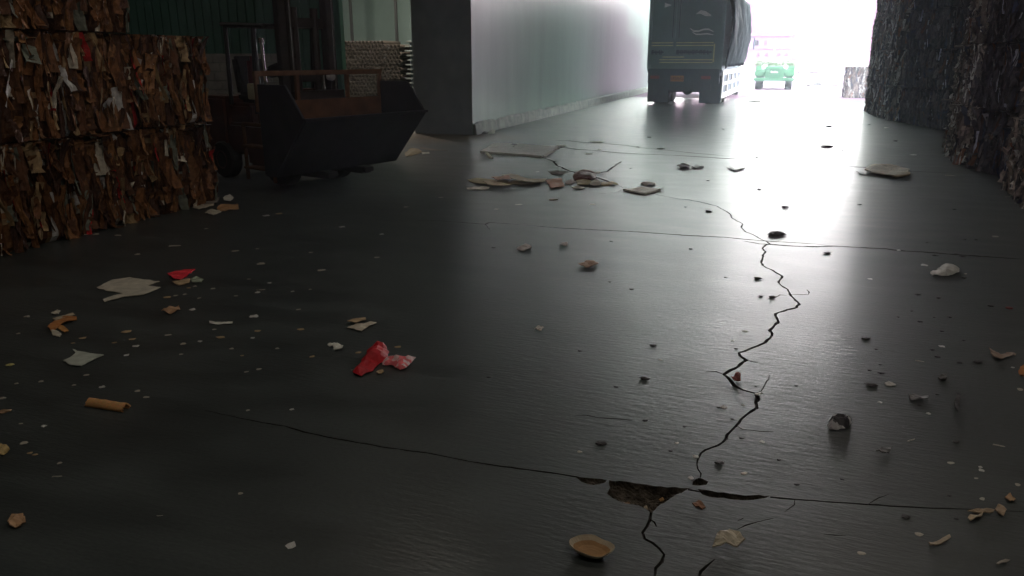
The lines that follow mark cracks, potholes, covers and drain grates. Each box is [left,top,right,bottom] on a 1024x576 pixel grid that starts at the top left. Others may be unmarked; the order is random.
pothole [607,481,690,516]
crack [698,559,715,576]
crack [205,140,1024,530]
crack [641,515,665,576]
